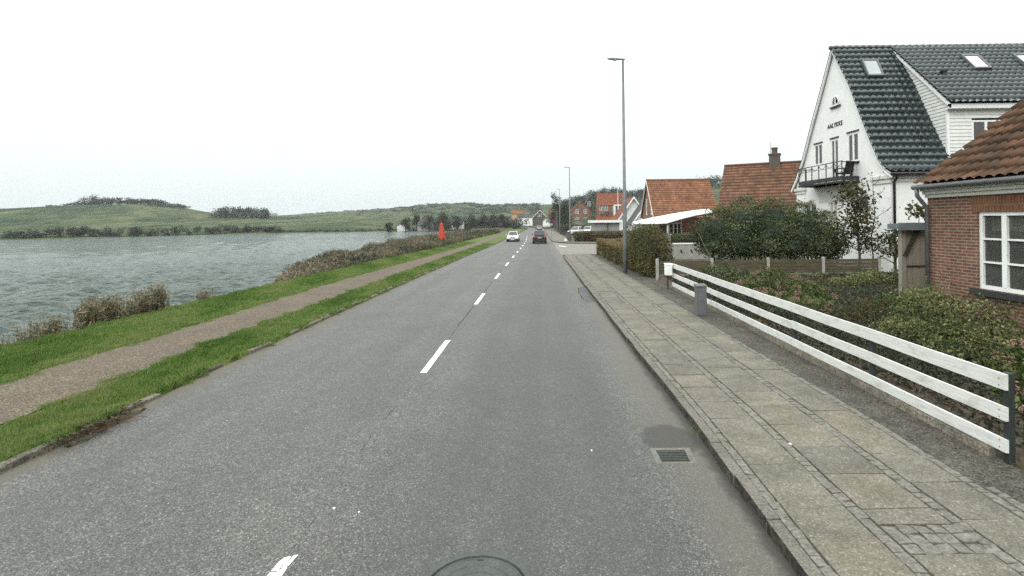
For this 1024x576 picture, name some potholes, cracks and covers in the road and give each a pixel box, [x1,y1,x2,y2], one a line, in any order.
manhole cover [423,551,534,576]
drain grate [650,448,697,464]
